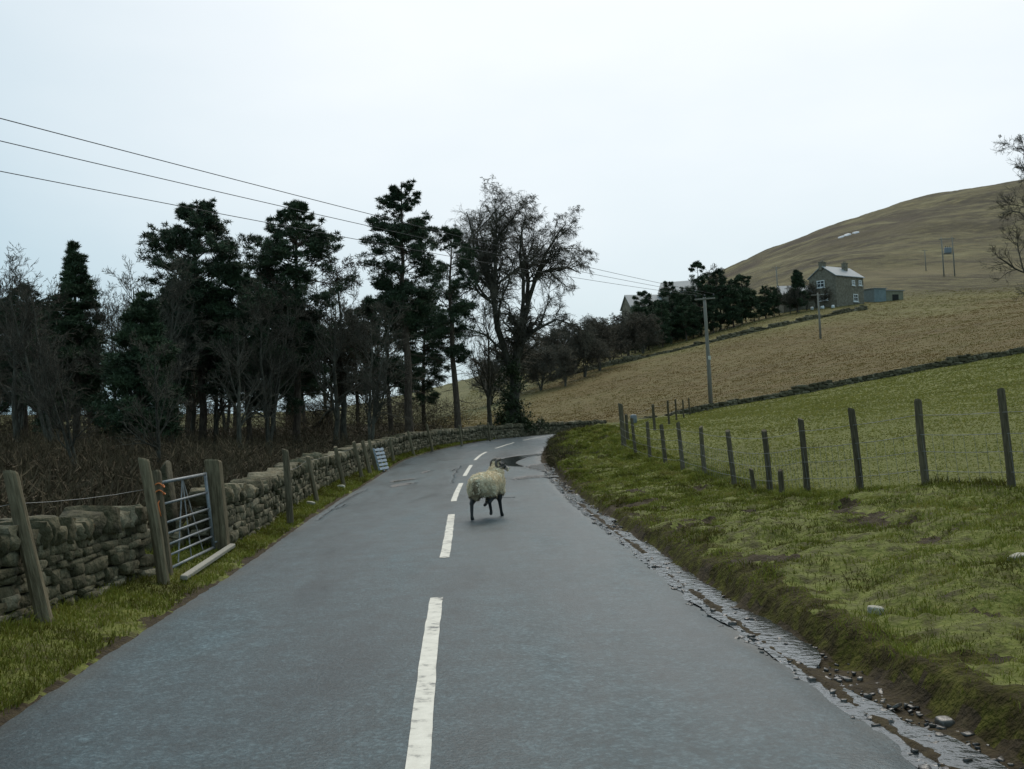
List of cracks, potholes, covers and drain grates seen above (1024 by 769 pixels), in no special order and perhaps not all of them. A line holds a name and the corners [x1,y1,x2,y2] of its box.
crack [315,489,370,520]
crack [449,466,462,483]
